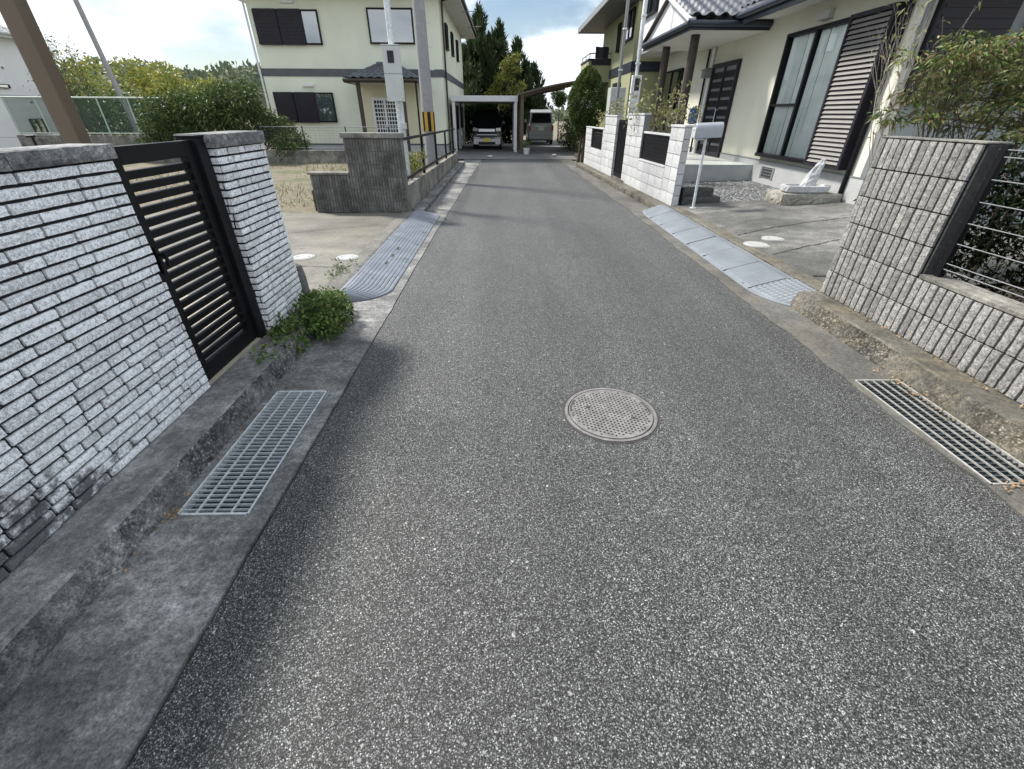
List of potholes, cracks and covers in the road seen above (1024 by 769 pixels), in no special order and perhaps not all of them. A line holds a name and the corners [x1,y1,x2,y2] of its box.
drain grate [855,379,1024,485]
drain grate [177,390,327,516]
manhole cover [563,387,660,444]
